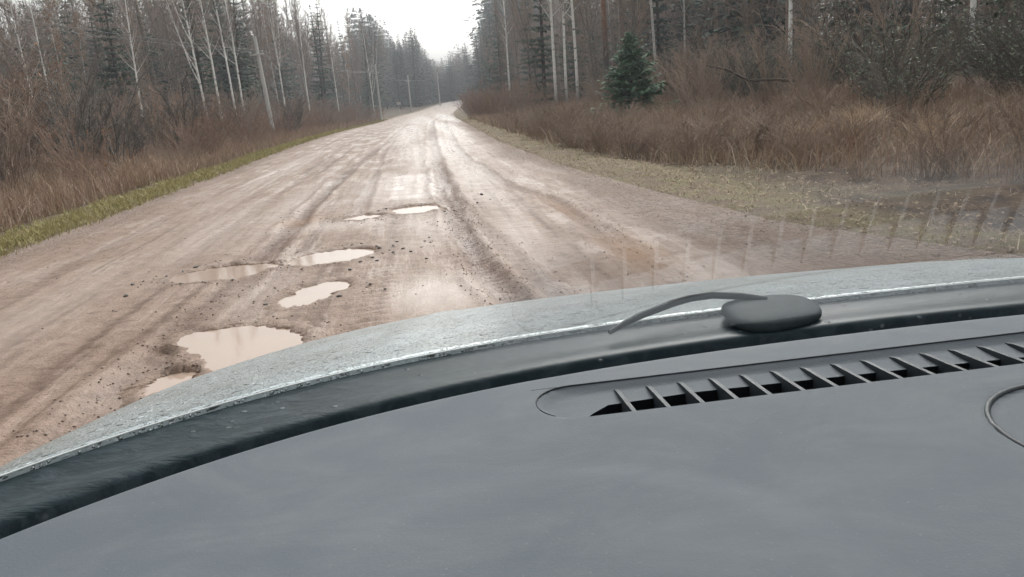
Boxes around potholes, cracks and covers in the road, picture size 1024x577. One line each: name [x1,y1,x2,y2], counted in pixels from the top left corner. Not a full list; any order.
pothole [158,318,325,373]
pothole [331,211,390,222]
pothole [155,257,288,285]
pothole [116,358,212,408]
pothole [260,275,366,312]
pothole [278,244,388,268]
pothole [381,201,451,215]
